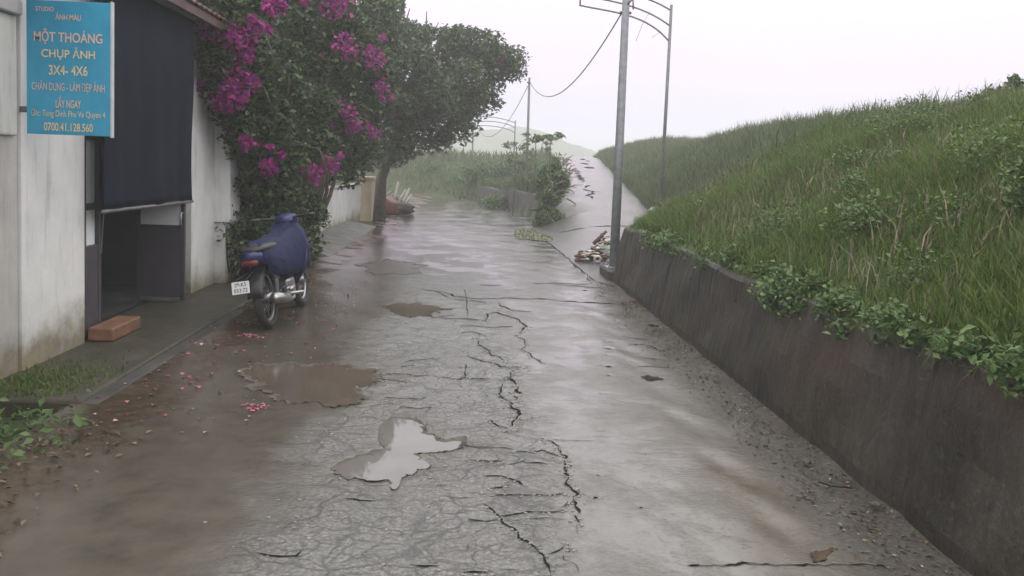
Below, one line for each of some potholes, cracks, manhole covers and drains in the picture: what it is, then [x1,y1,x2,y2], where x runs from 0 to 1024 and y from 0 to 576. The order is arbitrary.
pothole [355,259,428,275]
pothole [330,416,467,490]
pothole [375,301,453,317]
pothole [238,361,382,408]
crack [380,284,582,576]
